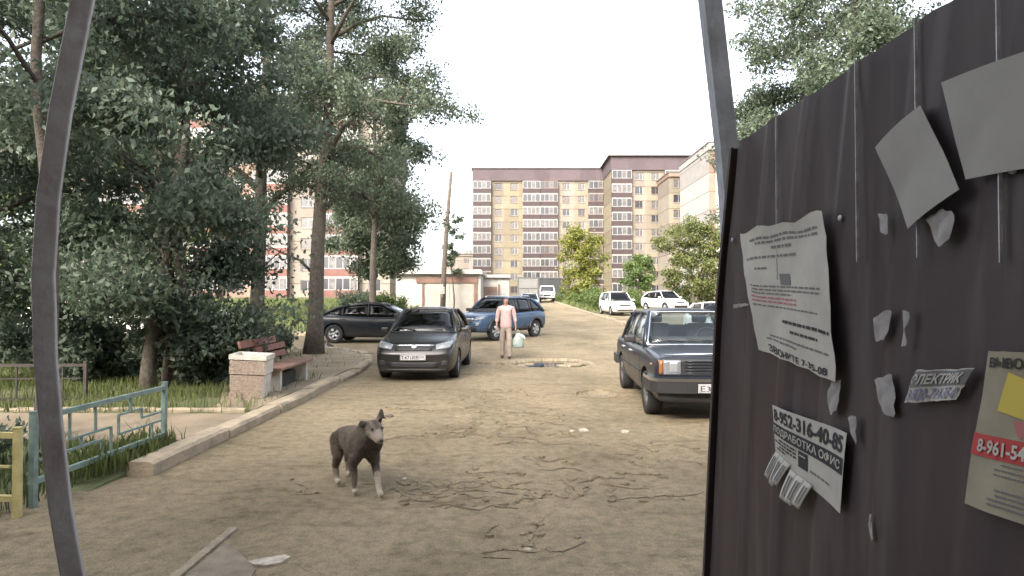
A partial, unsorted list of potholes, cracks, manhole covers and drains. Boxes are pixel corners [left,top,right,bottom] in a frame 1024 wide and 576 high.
crack [362,373,704,558]
pothole [502,358,595,368]
